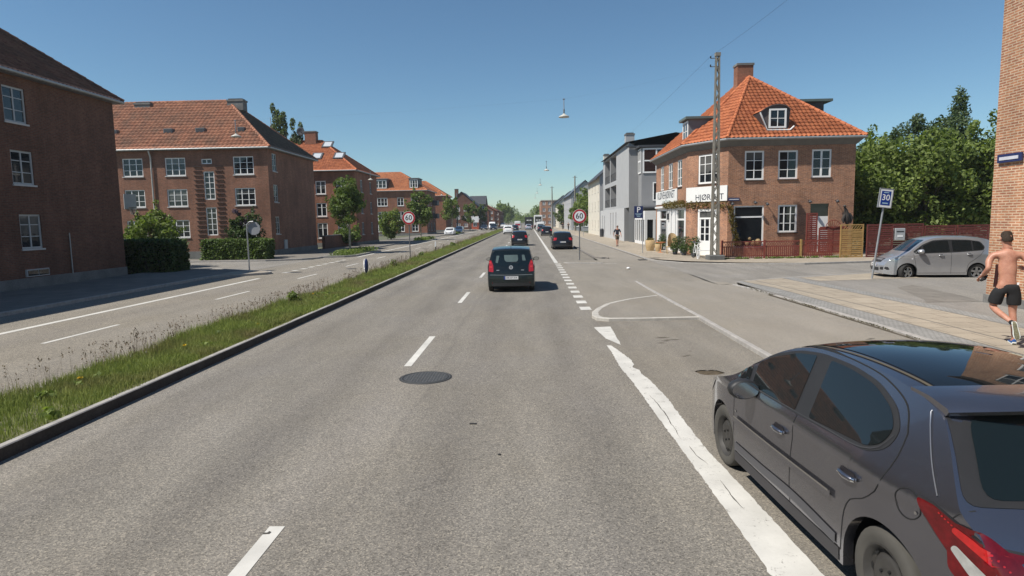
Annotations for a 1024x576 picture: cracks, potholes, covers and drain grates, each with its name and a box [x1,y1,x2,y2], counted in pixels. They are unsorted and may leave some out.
manhole cover [399,371,452,384]
crack [650,396,743,508]
